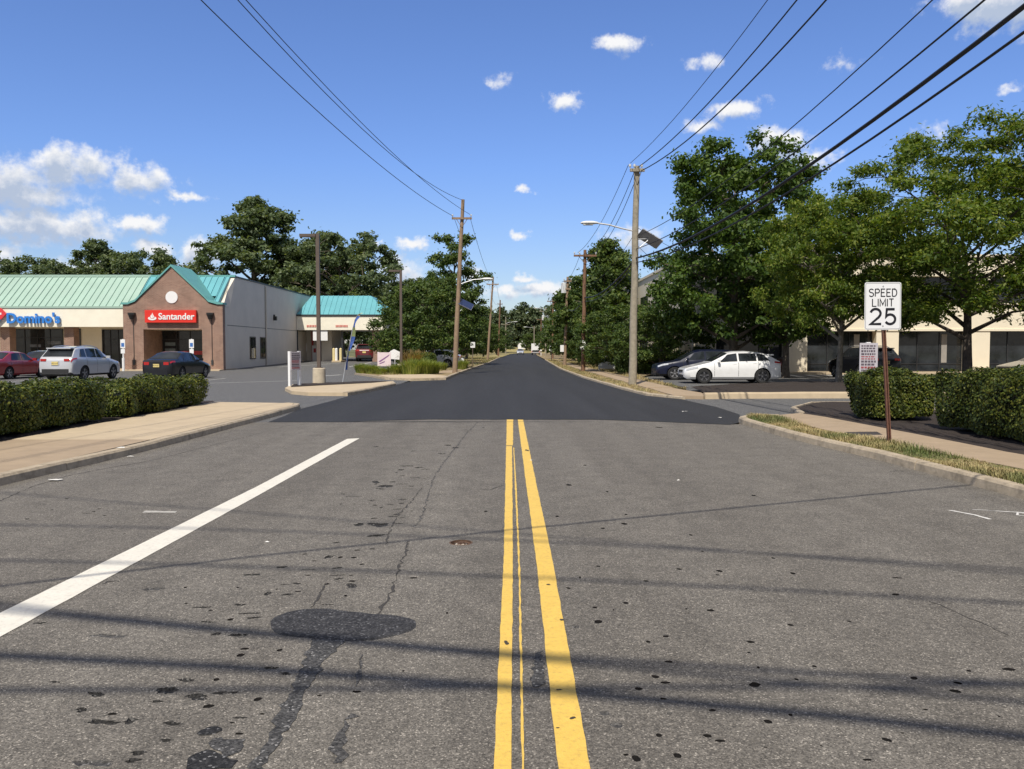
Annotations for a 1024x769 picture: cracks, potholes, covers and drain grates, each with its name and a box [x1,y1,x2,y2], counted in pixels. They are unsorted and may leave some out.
crack [355,654,363,686]
crack [377,422,478,614]
crack [328,713,359,763]
